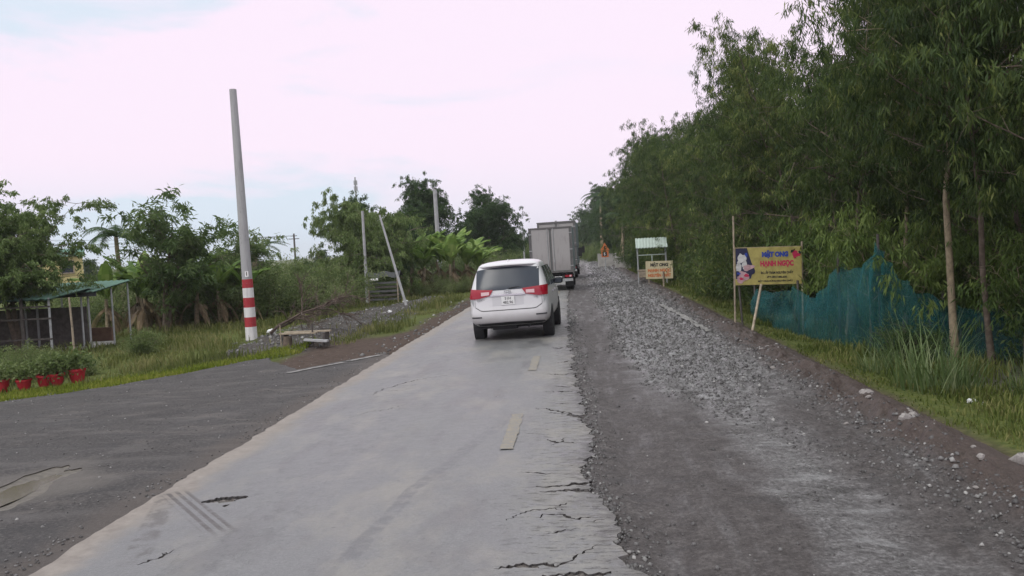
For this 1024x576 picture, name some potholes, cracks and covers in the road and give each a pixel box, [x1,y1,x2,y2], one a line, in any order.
pothole [0,465,82,511]
crack [506,472,604,534]
pothole [203,496,247,506]
